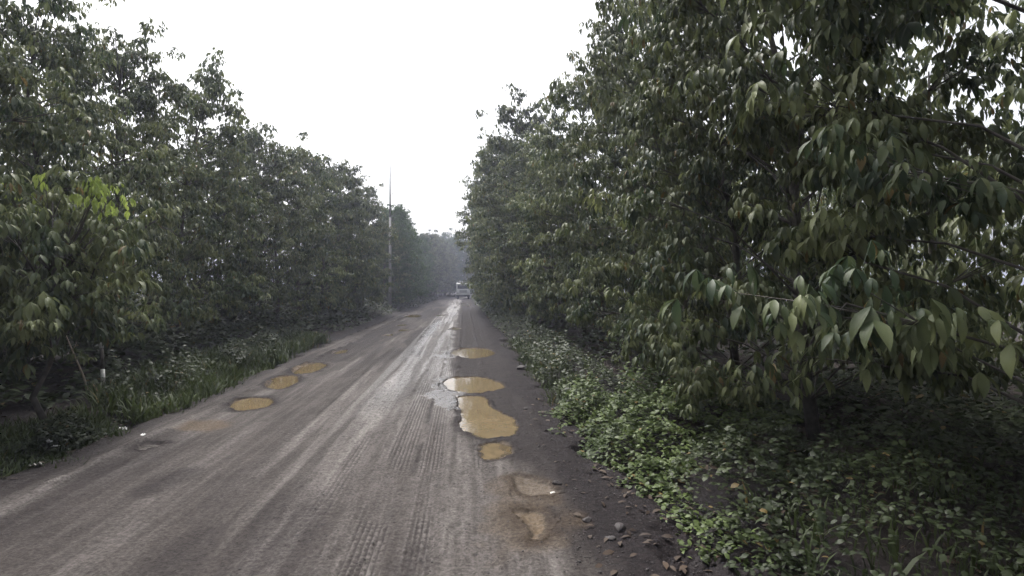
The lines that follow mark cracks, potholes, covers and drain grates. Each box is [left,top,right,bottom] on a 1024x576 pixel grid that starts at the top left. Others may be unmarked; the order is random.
pothole [509,507,560,542]
pothole [131,440,170,452]
pothole [454,394,523,440]
pothole [227,396,277,412]
